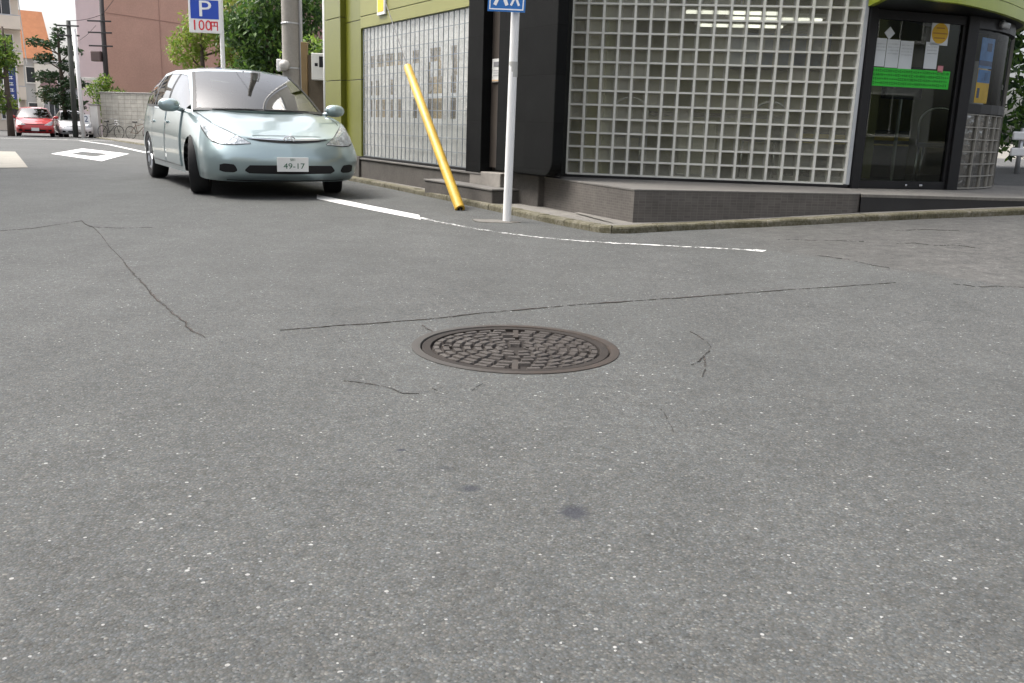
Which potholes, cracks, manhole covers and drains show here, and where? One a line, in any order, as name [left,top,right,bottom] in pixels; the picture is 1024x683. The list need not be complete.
crack [344,380,437,394]
crack [689,331,711,377]
manhole cover [411,325,619,374]
crack [82,221,205,338]
crack [284,239,896,341]
